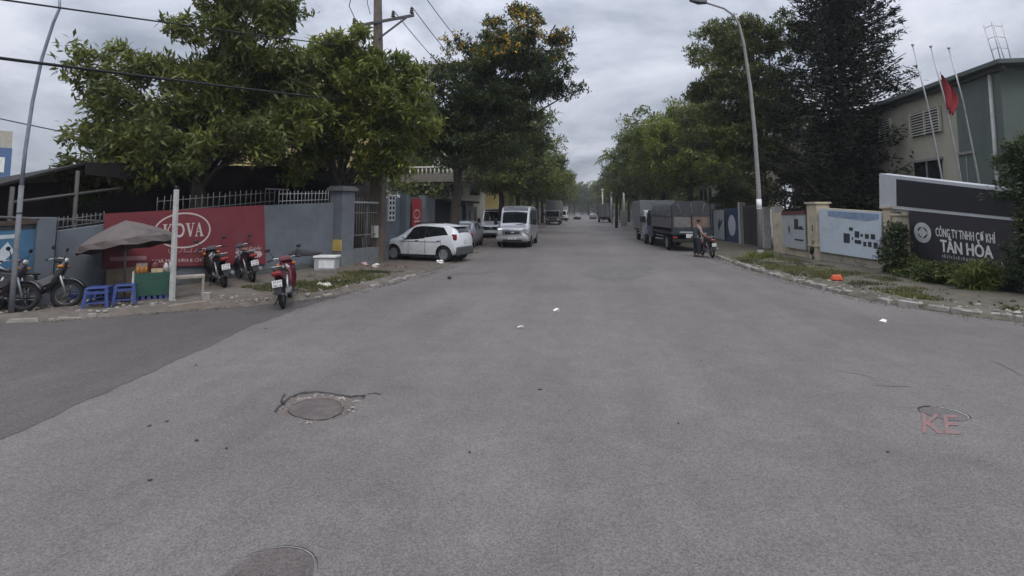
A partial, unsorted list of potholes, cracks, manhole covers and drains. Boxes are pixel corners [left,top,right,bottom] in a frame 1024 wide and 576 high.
manhole cover [225,545,318,576]
manhole cover [288,397,344,421]
